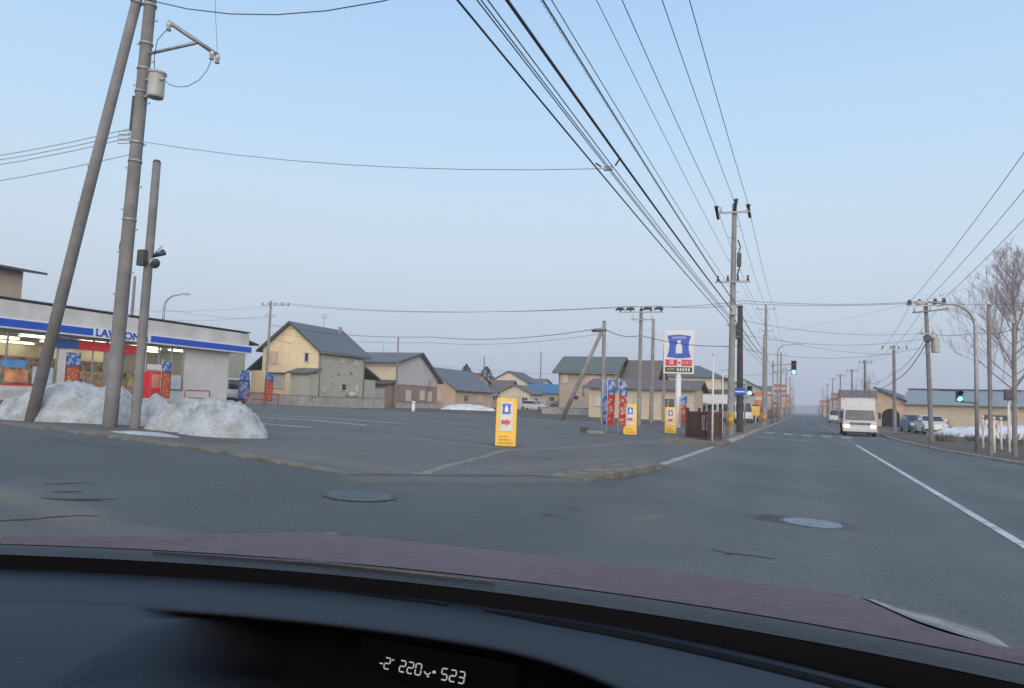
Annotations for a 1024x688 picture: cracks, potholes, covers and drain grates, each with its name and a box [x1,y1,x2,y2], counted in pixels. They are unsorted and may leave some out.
crack [0,483,103,521]
manhole cover [779,517,847,529]
manhole cover [322,489,396,501]
